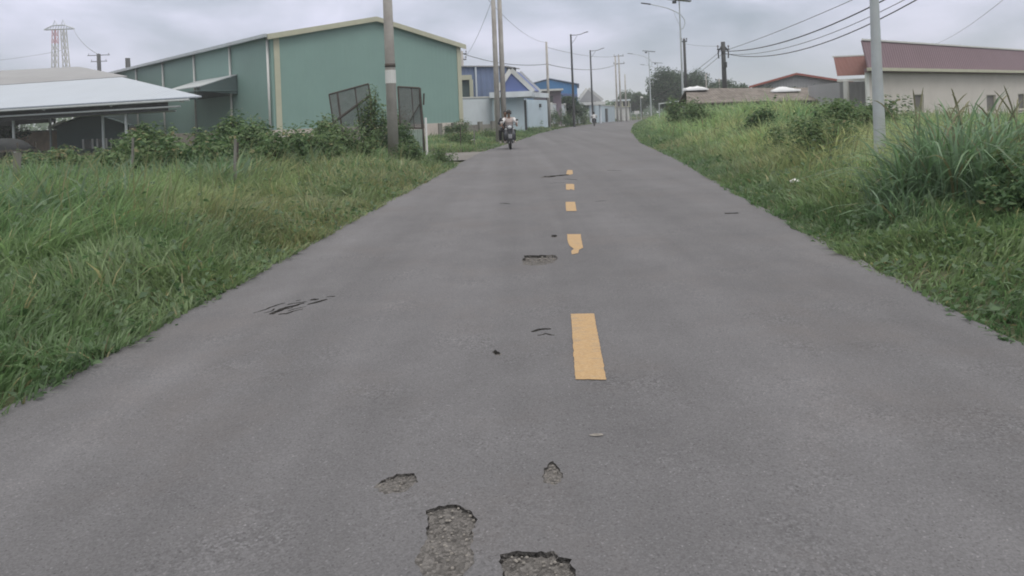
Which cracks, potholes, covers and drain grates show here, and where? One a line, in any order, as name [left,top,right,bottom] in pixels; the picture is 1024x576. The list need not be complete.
pothole [499,551,576,576]
crack [254,296,335,315]
pothole [522,255,558,266]
pothole [542,461,563,486]
pothole [374,473,418,494]
pothole [415,504,478,576]
crack [531,328,551,336]
